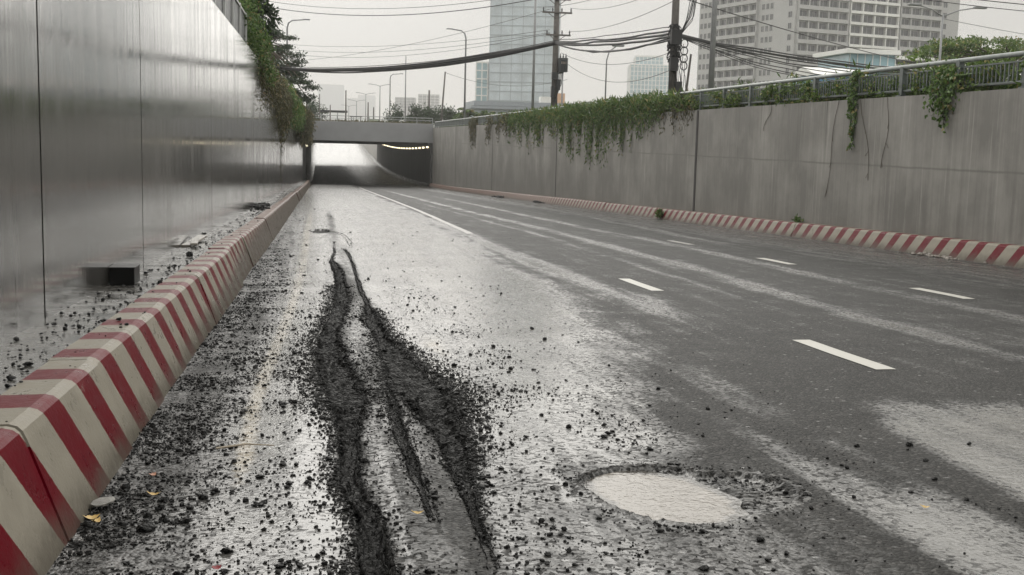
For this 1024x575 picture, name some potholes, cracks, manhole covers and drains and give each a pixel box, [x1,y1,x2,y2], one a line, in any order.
pothole [563,462,813,528]
